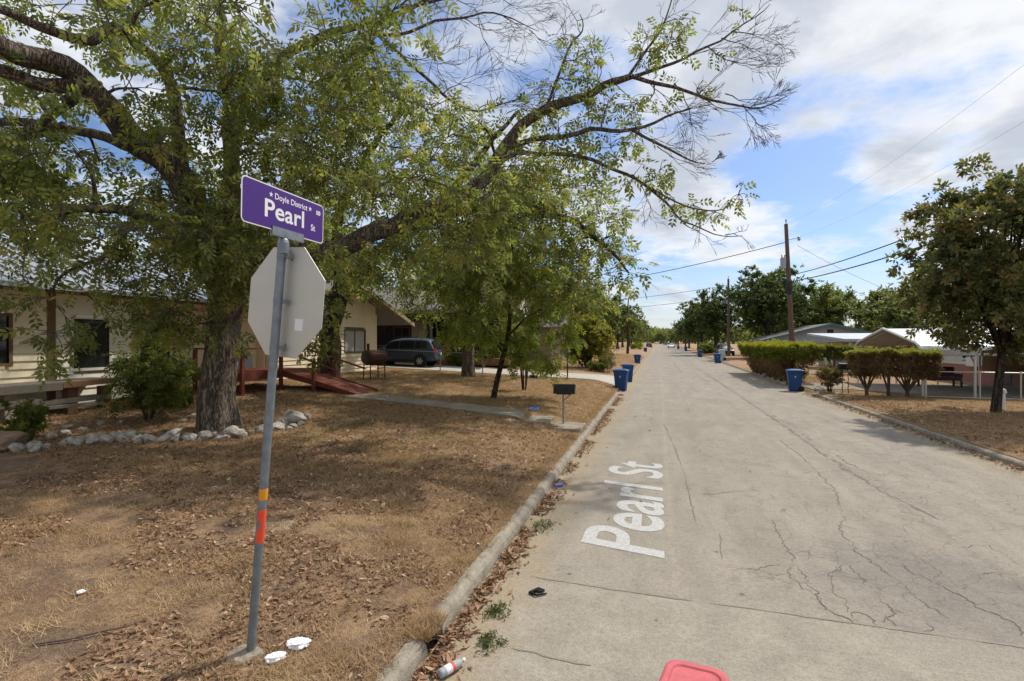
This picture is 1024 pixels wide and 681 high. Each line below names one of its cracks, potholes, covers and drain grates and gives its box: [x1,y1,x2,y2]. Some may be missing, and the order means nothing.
crack [742,516,1024,639]
crack [664,425,735,521]
